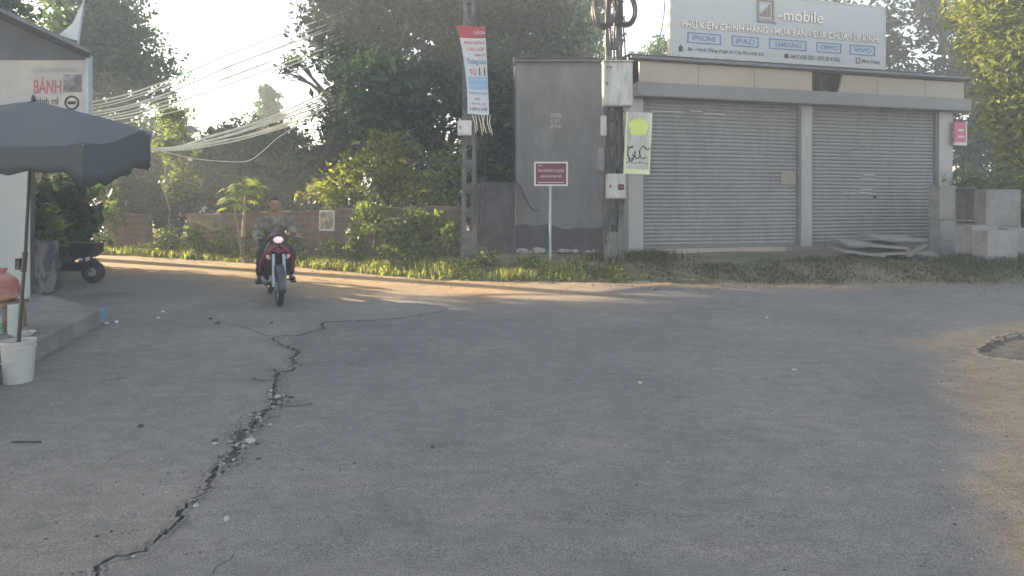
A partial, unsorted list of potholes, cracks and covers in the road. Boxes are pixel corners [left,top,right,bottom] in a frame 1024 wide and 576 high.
crack [87,304,446,576]
pothole [970,331,1024,363]
